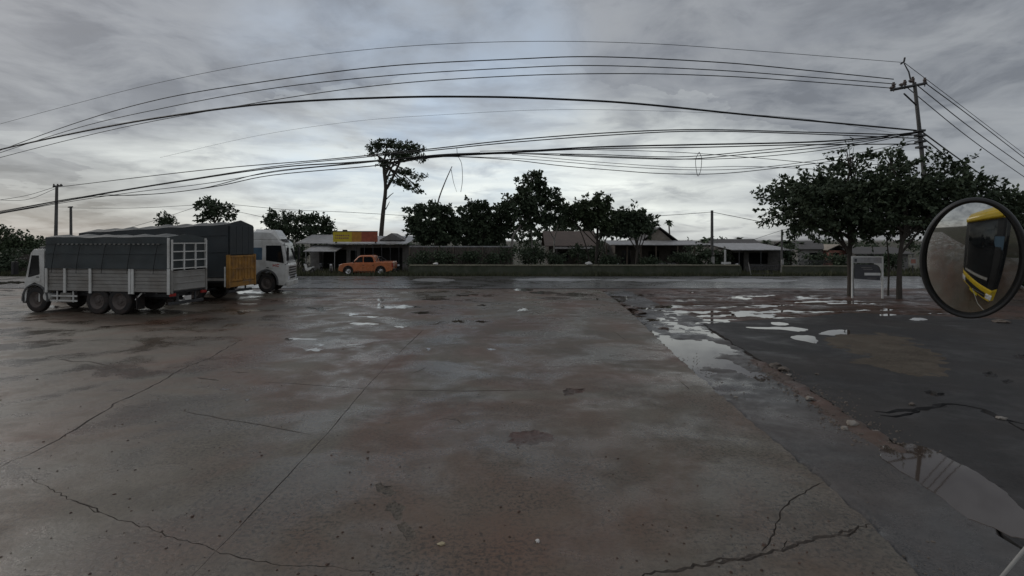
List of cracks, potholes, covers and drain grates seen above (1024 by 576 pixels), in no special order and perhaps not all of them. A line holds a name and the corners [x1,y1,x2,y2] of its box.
crack [31,478,379,573]
pothole [563,388,586,396]
crack [875,403,1024,431]
pothole [506,430,555,446]
crack [642,482,869,576]
